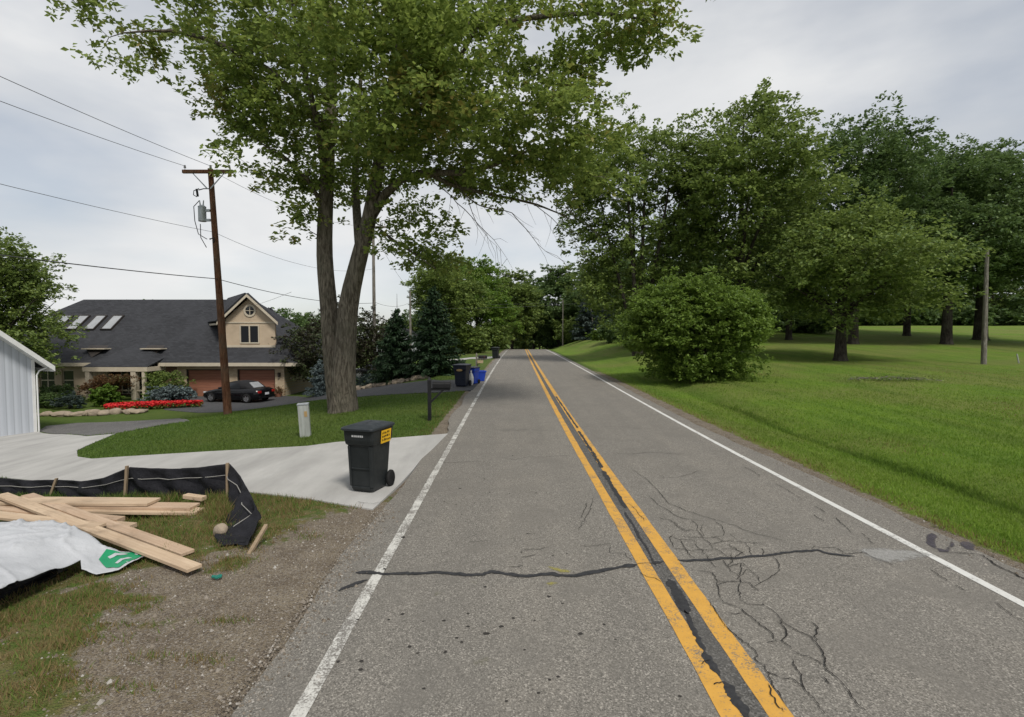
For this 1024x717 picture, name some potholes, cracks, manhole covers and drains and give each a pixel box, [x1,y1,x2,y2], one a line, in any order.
crack [633,471,894,715]
